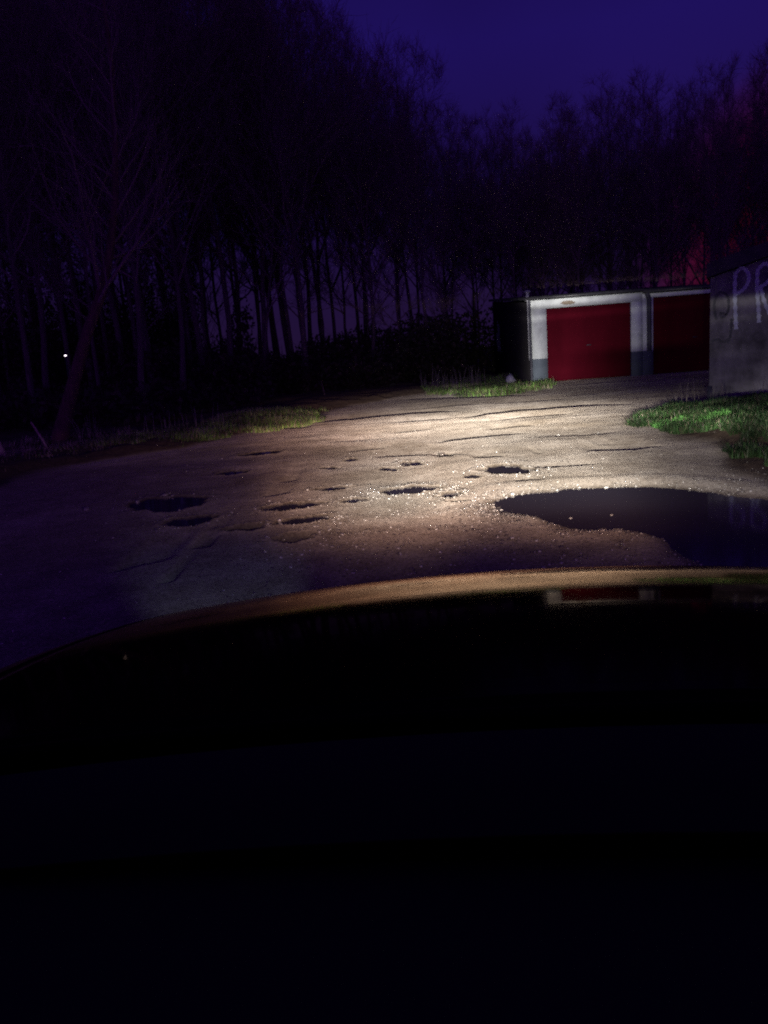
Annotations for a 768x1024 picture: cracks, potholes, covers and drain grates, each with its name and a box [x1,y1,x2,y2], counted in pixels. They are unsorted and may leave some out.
pothole [376,484,446,495]
pothole [124,494,211,512]
pothole [489,485,768,567]
pothole [474,463,540,474]
pothole [160,514,221,527]
pothole [257,500,332,511]
pothole [270,513,334,525]
